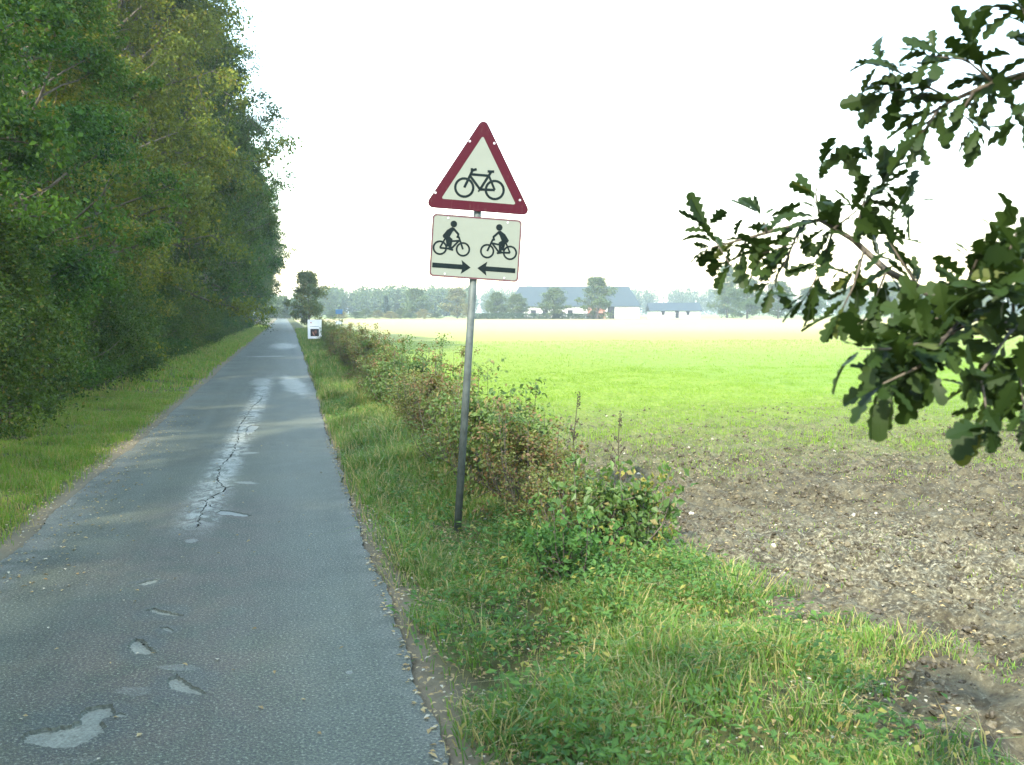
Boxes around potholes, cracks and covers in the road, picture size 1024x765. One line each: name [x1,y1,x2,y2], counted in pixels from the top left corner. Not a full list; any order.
pothole [166,674,207,695]
pothole [127,638,158,654]
pothole [20,704,116,748]
pothole [146,607,184,616]
